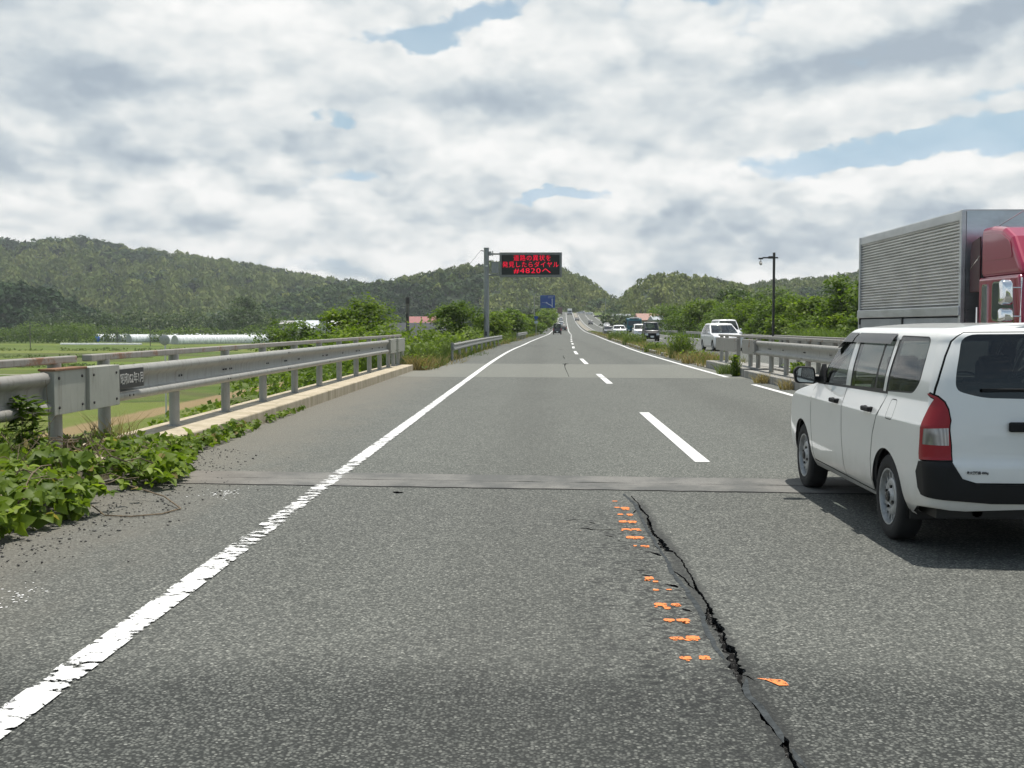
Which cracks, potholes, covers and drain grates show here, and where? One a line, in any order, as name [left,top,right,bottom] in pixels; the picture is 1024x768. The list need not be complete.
crack [566,494,807,768]
